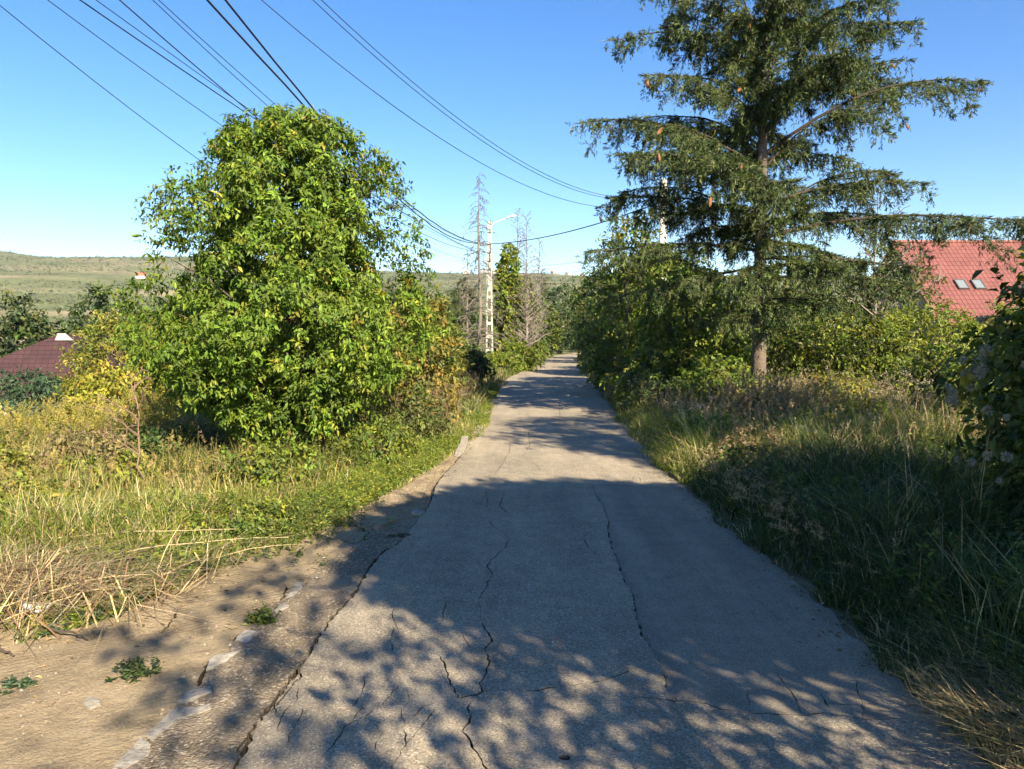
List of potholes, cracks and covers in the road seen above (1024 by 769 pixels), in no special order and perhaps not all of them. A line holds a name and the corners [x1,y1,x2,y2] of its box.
crack [235,537,405,765]
crack [633,675,926,723]
crack [319,676,446,768]
crack [435,491,640,769]
